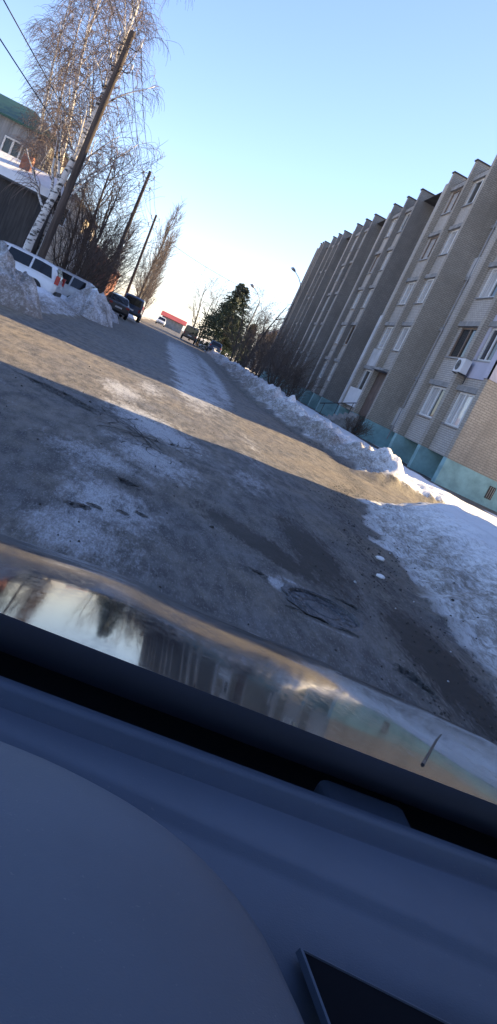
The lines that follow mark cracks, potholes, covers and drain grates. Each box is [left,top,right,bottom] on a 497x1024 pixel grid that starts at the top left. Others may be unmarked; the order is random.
pothole [113,475,145,491]
pothole [285,605,360,638]
